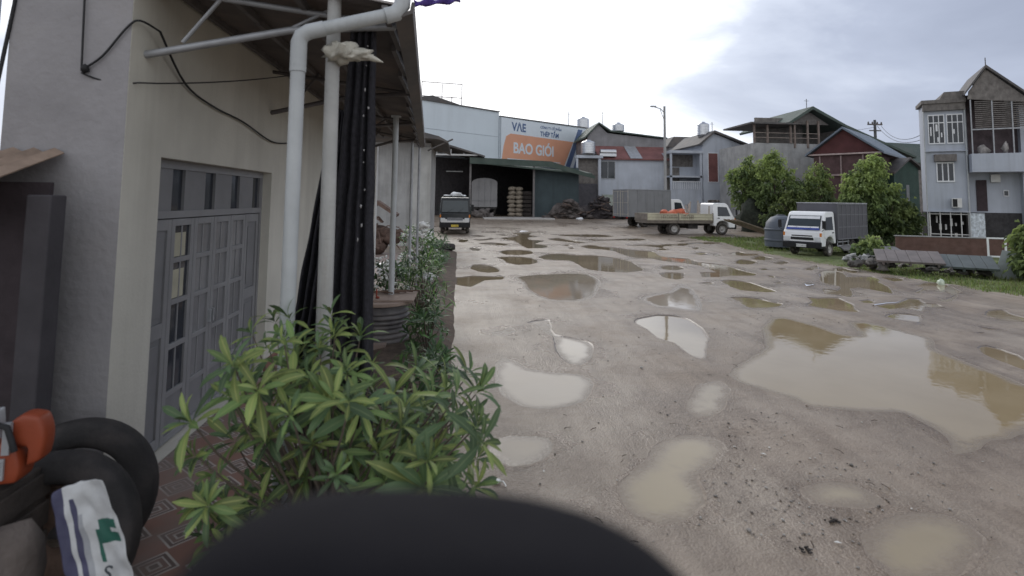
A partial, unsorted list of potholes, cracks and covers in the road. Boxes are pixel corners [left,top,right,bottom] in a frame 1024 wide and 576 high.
pothole [487,435,554,467]
pothole [817,270,894,297]
pothole [515,273,600,301]
pothole [494,357,594,409]
pothole [799,480,889,509]
pothole [527,319,594,365]
pothole [807,297,861,312]
pothole [685,381,732,418]
pothole [640,283,703,311]
pothole [860,512,987,576]
pothole [501,231,548,248]
pothole [728,317,1024,455]
